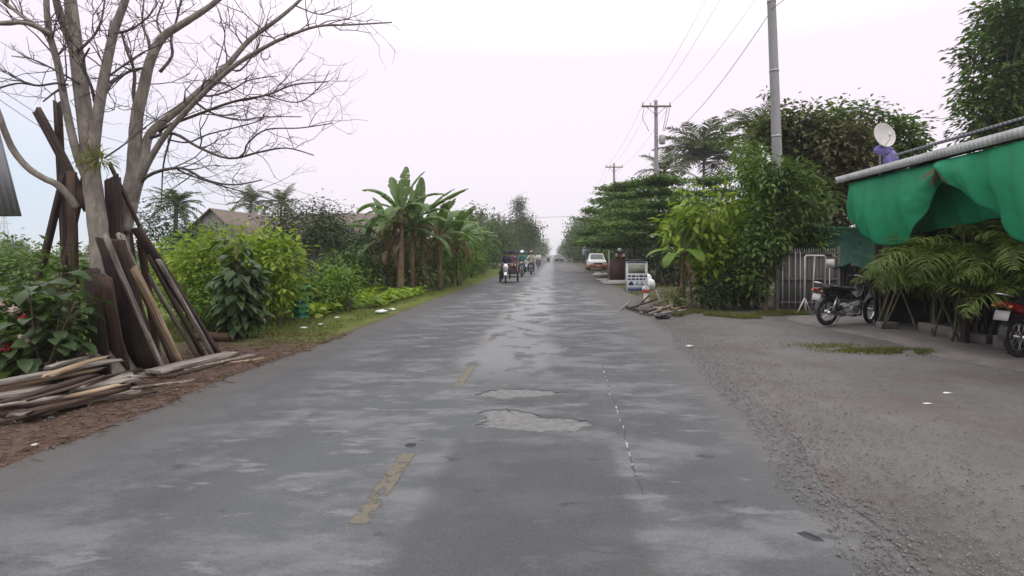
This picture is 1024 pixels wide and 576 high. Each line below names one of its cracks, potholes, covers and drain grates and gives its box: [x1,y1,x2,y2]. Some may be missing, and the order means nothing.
pothole [475,409,596,432]
pothole [475,389,567,398]
crack [602,367,643,494]
